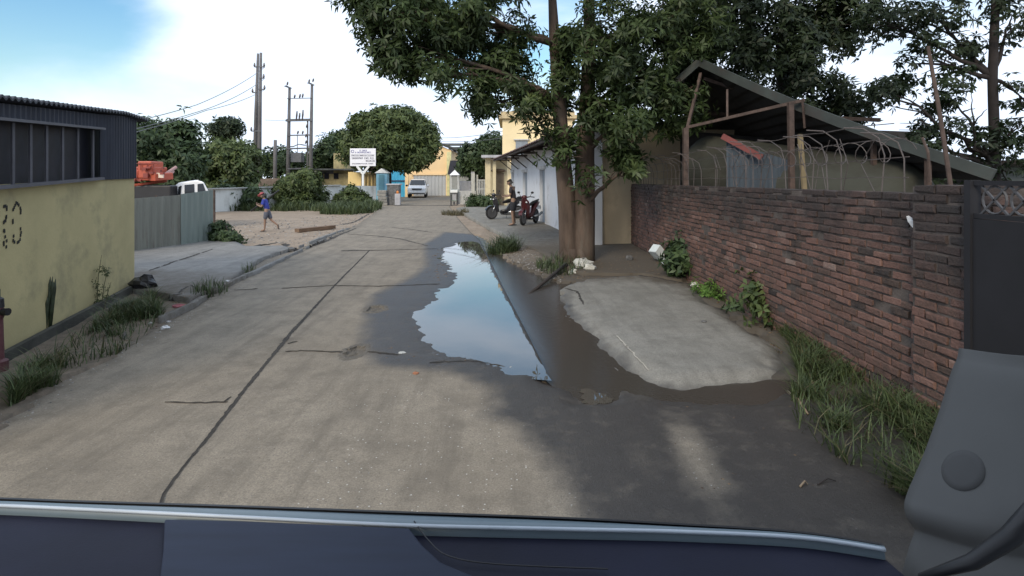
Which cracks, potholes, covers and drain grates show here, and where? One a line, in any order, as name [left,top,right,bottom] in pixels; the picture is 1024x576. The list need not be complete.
pothole [362,305,389,313]
pothole [337,343,371,361]
